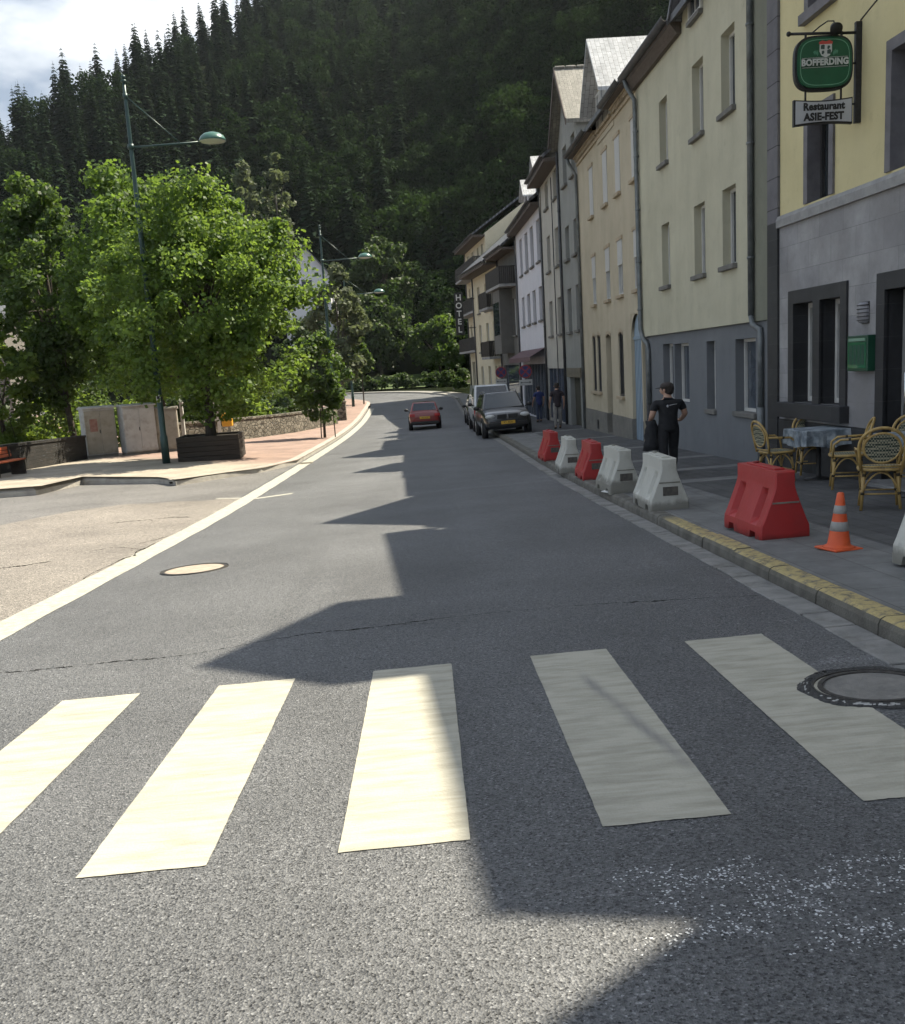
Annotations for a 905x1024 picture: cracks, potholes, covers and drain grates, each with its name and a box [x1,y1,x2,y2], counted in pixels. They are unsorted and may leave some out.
manhole cover [160,563,229,576]
manhole cover [797,666,905,709]
crack [83,517,170,579]
crack [0,595,759,673]
